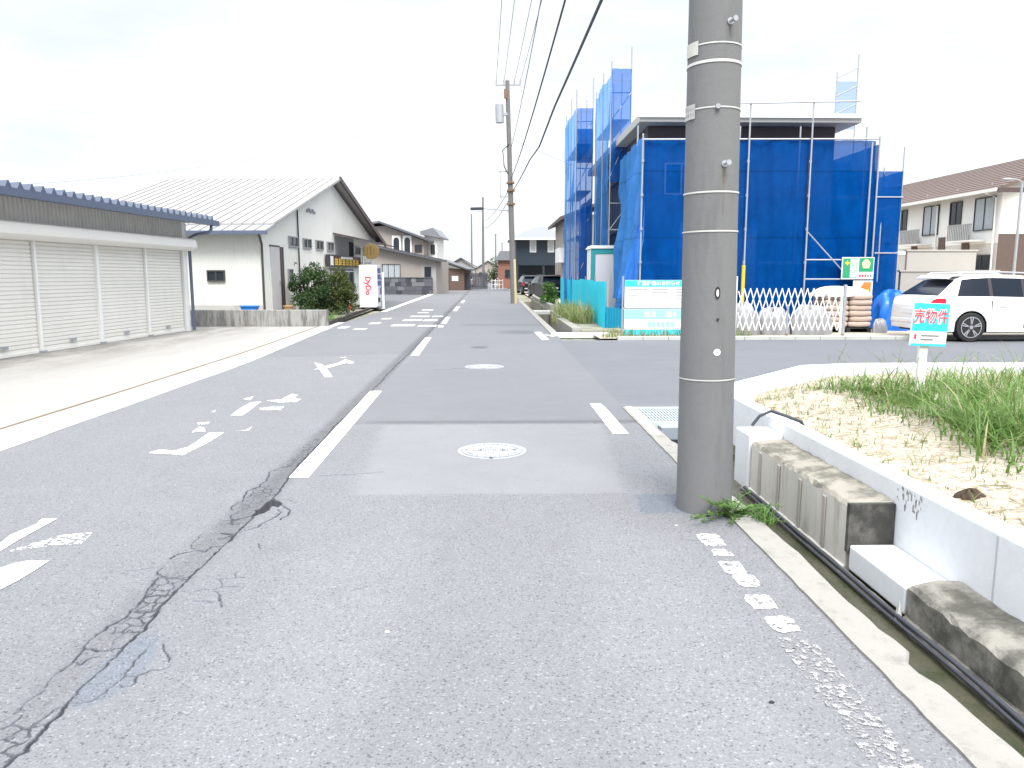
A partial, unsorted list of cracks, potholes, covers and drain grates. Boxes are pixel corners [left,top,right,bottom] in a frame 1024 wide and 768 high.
pothole [250,498,283,518]
drain grate [633,407,679,440]
manhole cover [457,443,526,459]
crack [0,309,460,768]
